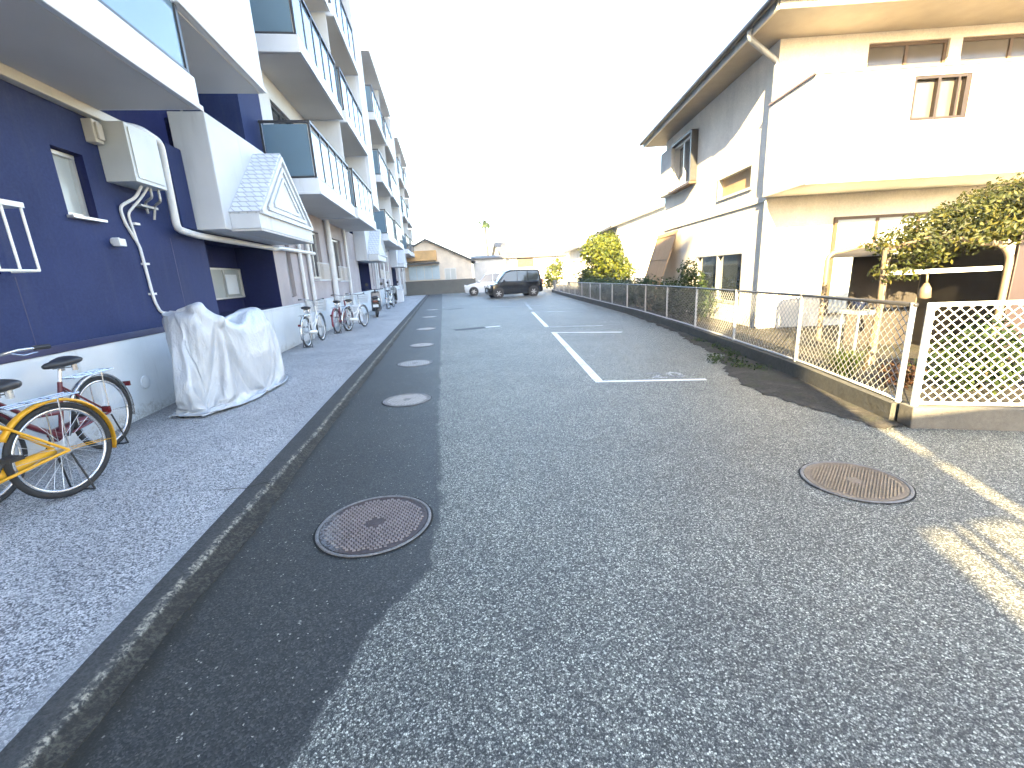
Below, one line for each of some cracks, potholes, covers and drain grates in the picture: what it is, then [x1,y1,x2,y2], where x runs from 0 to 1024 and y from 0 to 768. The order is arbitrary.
manhole cover [798,461,917,504]
manhole cover [313,495,433,559]
manhole cover [381,393,431,407]
